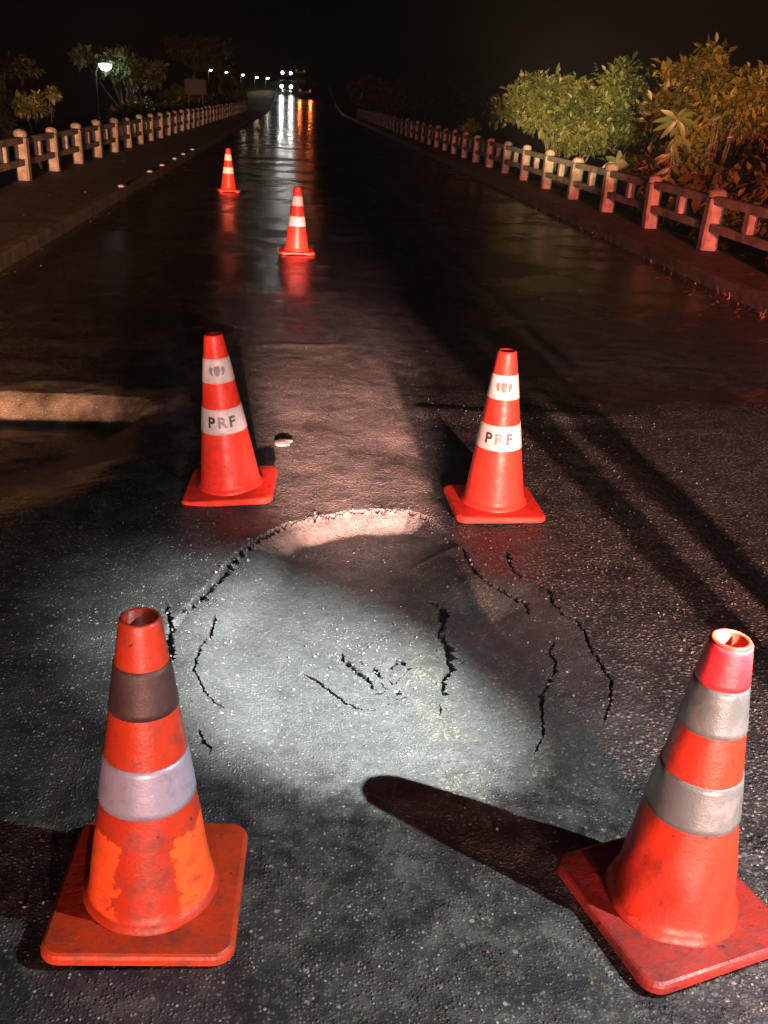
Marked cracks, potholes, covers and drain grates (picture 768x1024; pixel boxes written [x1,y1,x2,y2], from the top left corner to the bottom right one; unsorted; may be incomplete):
pothole [172,517,606,820]
crack [156,506,623,761]
